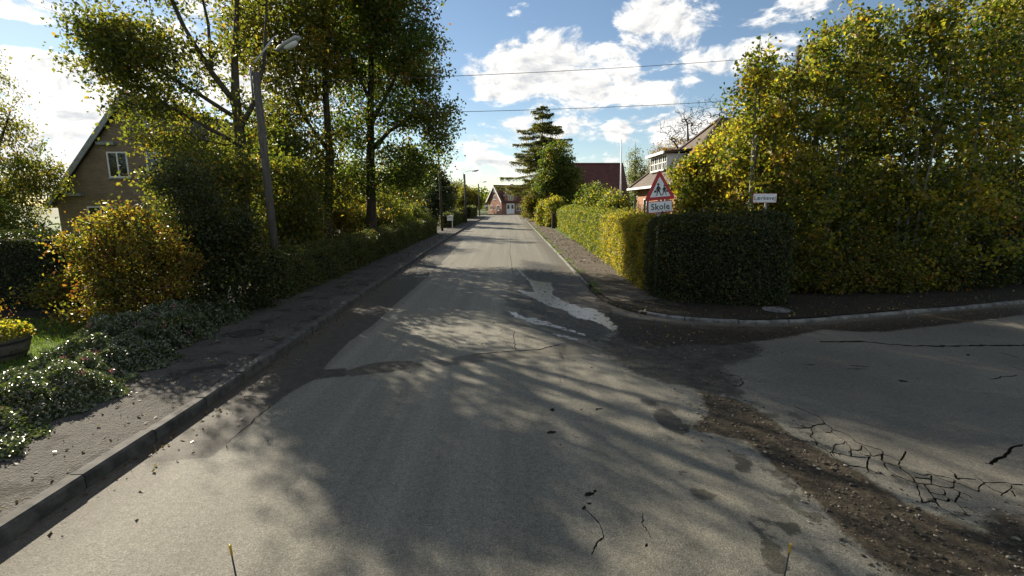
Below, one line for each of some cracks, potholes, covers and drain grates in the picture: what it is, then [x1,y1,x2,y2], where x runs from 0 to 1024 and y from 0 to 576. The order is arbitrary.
crack [585,509,604,555]
crack [789,406,1023,520]
crack [478,332,560,354]
